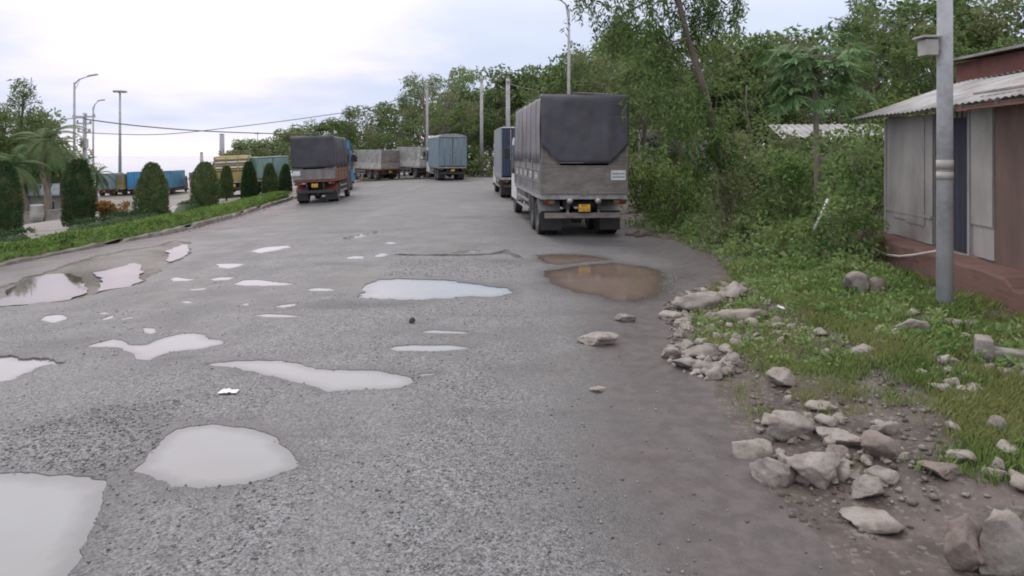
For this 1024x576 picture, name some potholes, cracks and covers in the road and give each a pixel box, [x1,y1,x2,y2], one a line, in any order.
pothole [535,254,610,265]
pothole [0,472,107,576]
pothole [84,333,228,360]
pothole [209,360,415,392]
pothole [357,278,512,300]
pothole [543,262,666,301]
pothole [133,423,301,488]
pothole [252,245,291,253]
pothole [0,355,66,382]
